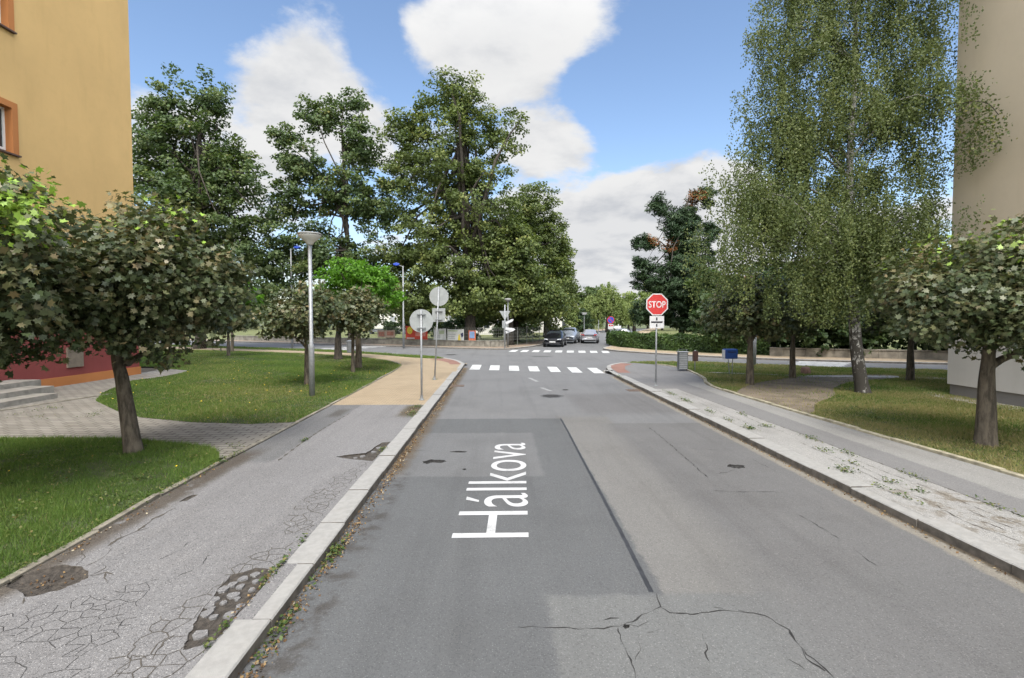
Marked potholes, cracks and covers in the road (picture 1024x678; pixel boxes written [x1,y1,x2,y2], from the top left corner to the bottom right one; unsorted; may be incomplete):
crack [0,462,368,678]
pothole [183,568,272,650]
crack [522,594,831,678]
pothole [336,442,390,461]
pothole [6,565,89,597]
